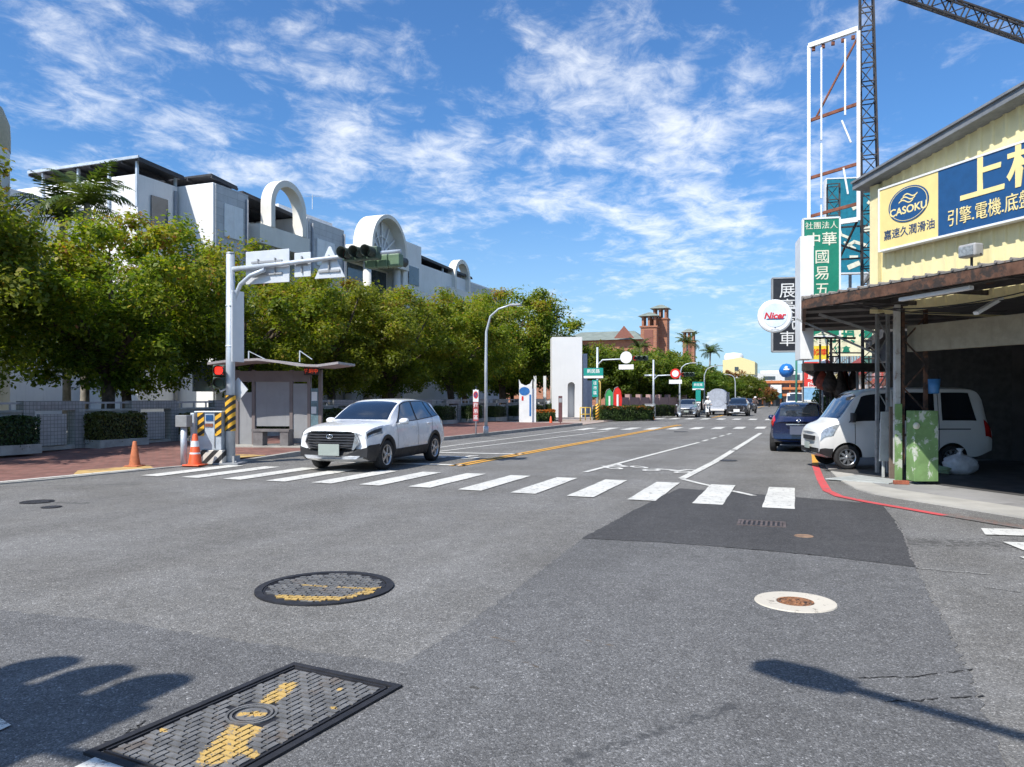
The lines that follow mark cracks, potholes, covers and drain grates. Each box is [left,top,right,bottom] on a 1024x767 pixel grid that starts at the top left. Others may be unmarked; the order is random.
drain grate [737,519,786,528]
manhole cover [254,571,394,606]
crack [858,669,972,678]
manhole cover [754,591,838,613]
manhole cover [83,662,403,767]
